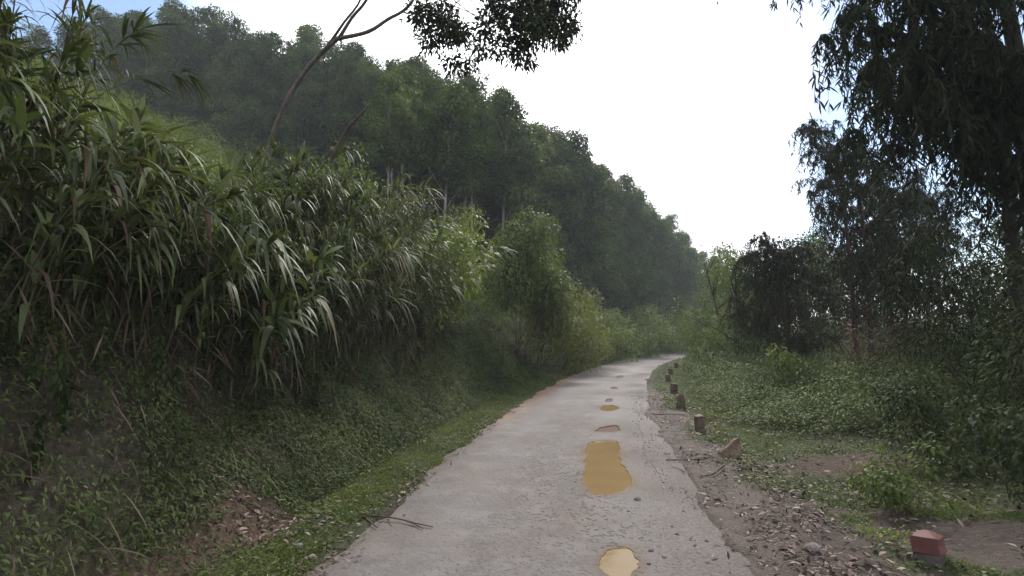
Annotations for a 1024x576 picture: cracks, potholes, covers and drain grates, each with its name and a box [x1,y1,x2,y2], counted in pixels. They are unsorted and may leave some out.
pothole [599,547,640,576]
pothole [583,440,632,495]
